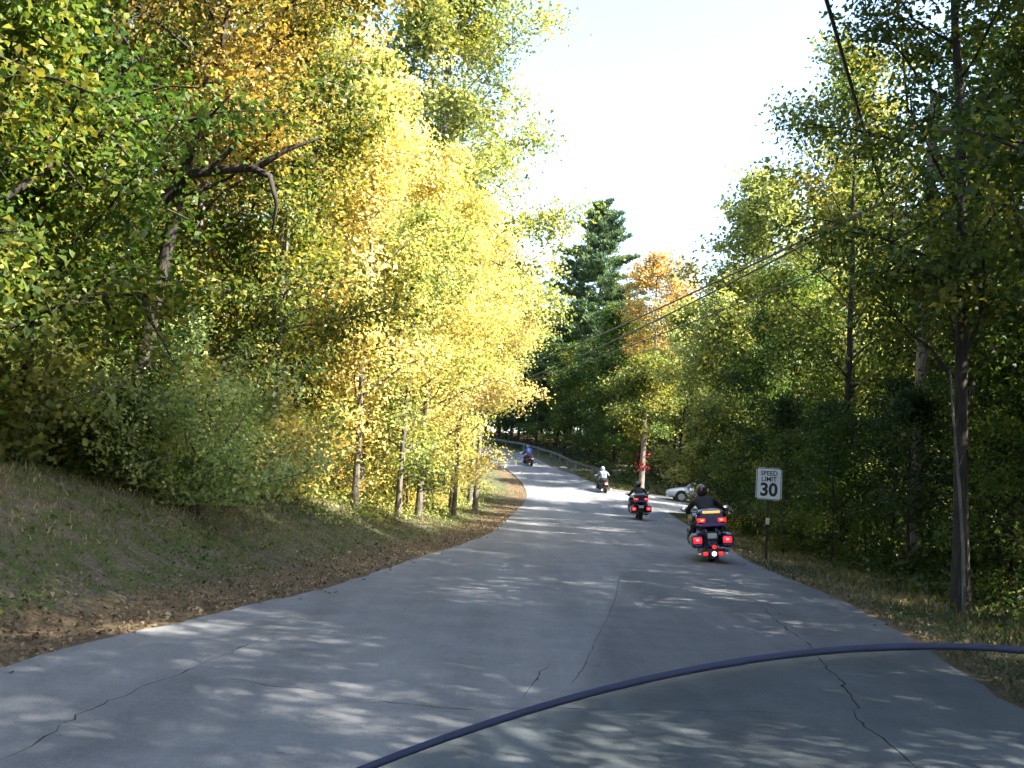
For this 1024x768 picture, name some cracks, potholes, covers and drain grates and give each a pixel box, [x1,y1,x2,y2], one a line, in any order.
crack [764,605,917,768]
crack [3,627,289,759]
